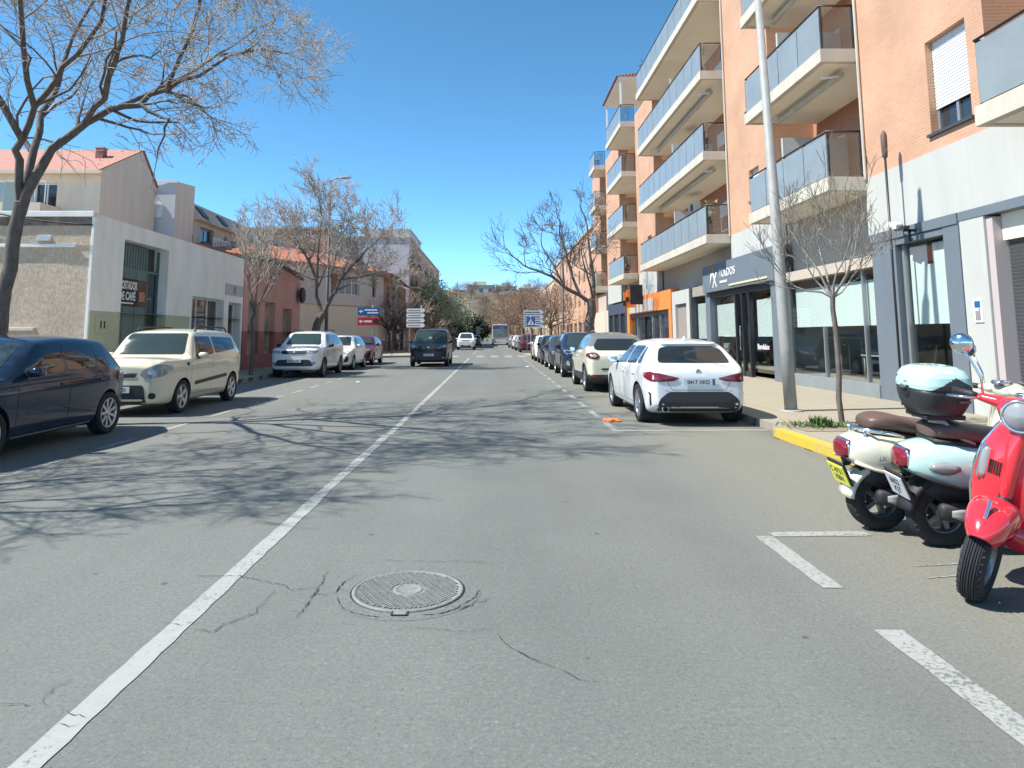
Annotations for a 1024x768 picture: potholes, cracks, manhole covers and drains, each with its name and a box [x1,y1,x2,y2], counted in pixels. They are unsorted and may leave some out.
manhole cover [334,567,481,621]
crack [196,574,324,631]
